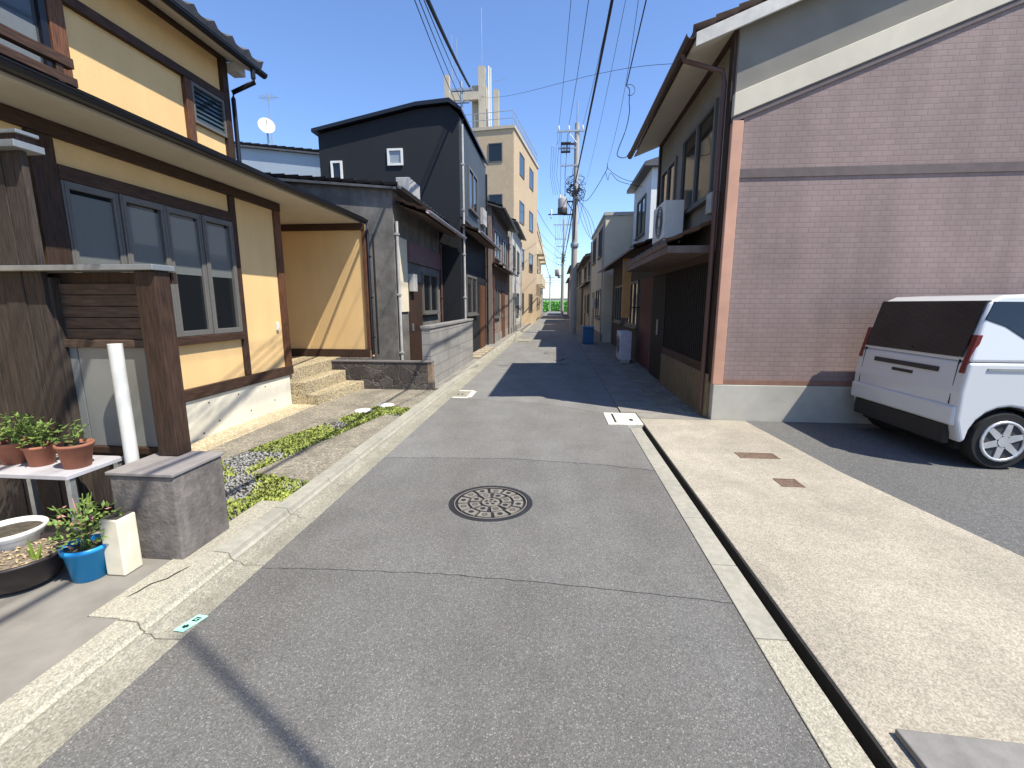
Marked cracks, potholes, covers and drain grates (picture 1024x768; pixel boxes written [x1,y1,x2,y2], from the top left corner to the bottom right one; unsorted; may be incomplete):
crack [127,566,190,597]
manhole cover [449,486,532,522]
